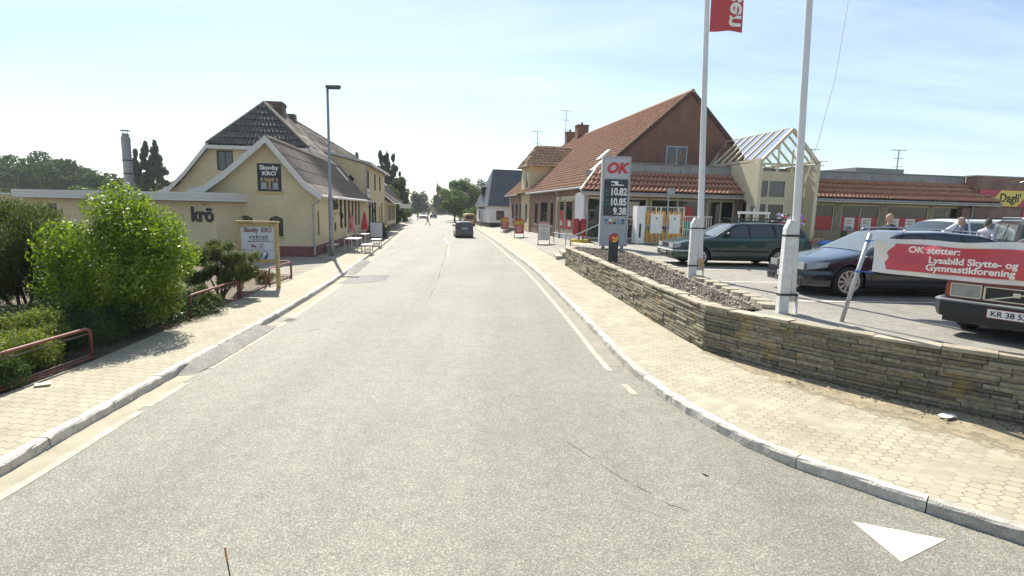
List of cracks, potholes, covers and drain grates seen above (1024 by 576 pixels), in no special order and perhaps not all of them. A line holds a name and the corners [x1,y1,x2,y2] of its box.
crack [567,442,690,512]
